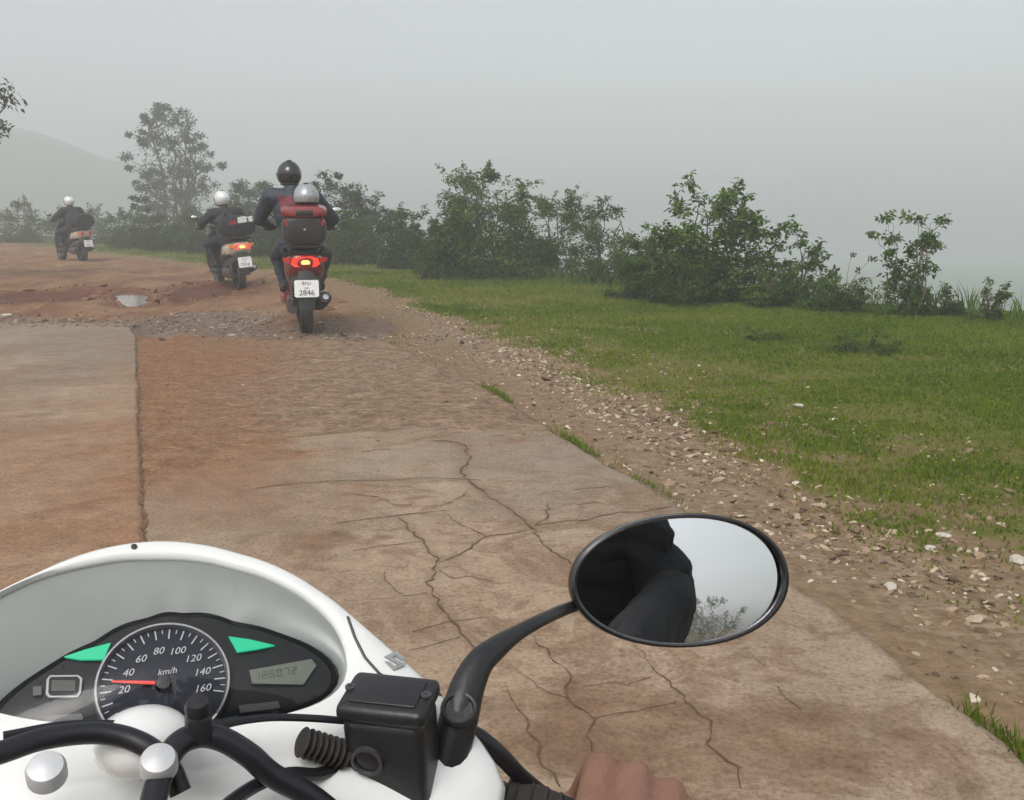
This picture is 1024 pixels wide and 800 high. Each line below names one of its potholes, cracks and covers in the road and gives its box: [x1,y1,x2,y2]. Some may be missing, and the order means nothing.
crack [505,634,741,788]
pothole [106,289,157,306]
crack [258,440,673,650]
pothole [0,288,100,305]
